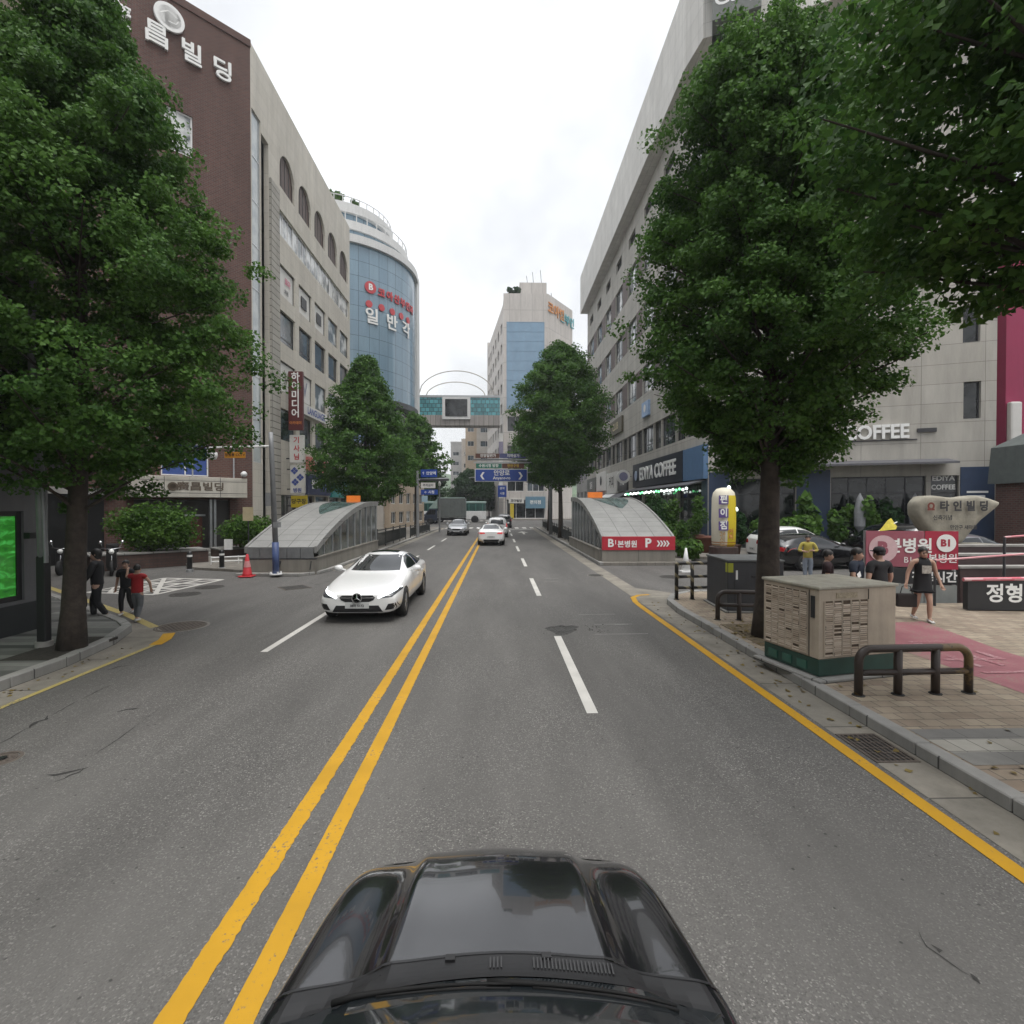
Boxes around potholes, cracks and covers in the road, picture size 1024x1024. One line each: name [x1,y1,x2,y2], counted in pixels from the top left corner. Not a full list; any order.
drain grate [835,733,921,763]
manhole cover [0,751,25,765]
manhole cover [153,621,210,633]
crack [48,708,157,782]
crack [918,930,981,984]
crack [1,665,128,743]
